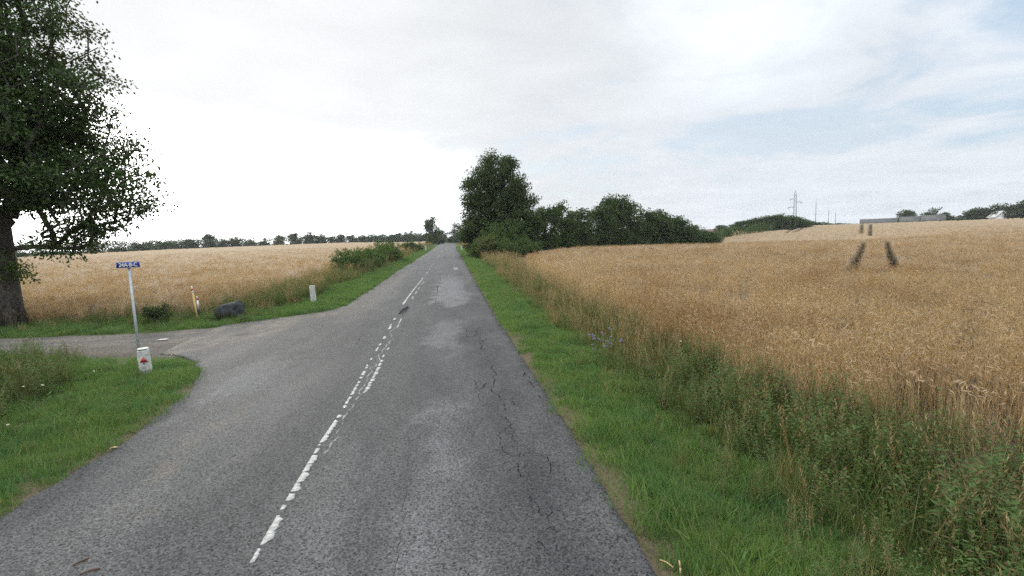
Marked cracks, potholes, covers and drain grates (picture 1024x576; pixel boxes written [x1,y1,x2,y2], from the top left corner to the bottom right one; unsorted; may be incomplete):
crack [529,494,565,552]
crack [464,328,551,477]
